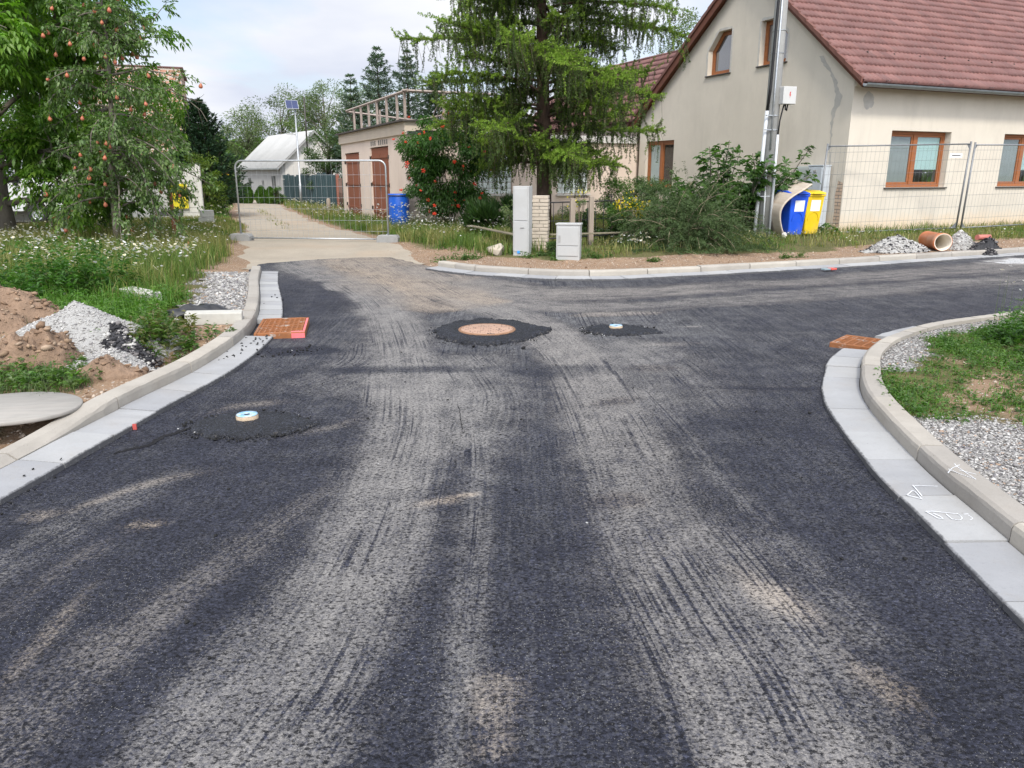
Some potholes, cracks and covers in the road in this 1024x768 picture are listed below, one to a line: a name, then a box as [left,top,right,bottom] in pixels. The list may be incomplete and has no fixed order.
drain grate [254,317,310,339]
drain grate [829,335,881,350]
manhole cover [458,323,516,336]
